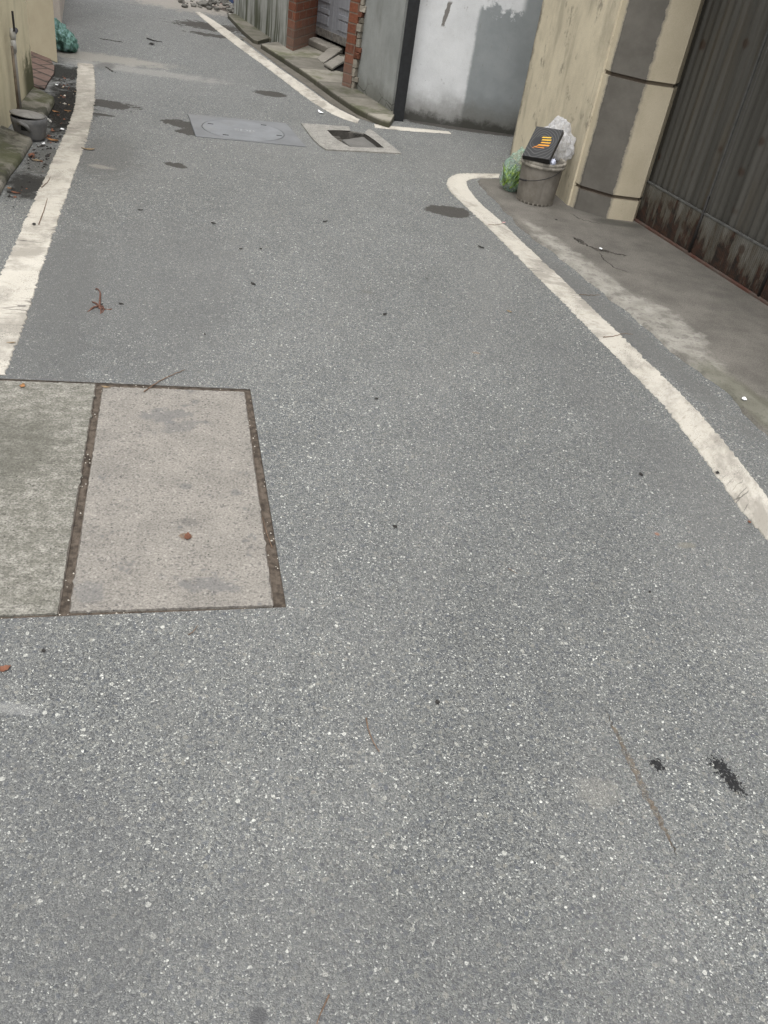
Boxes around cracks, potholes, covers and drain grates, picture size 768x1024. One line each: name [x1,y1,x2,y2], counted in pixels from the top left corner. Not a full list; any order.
manhole cover [187,114,306,147]
manhole cover [301,123,401,155]
crack [570,213,632,274]
